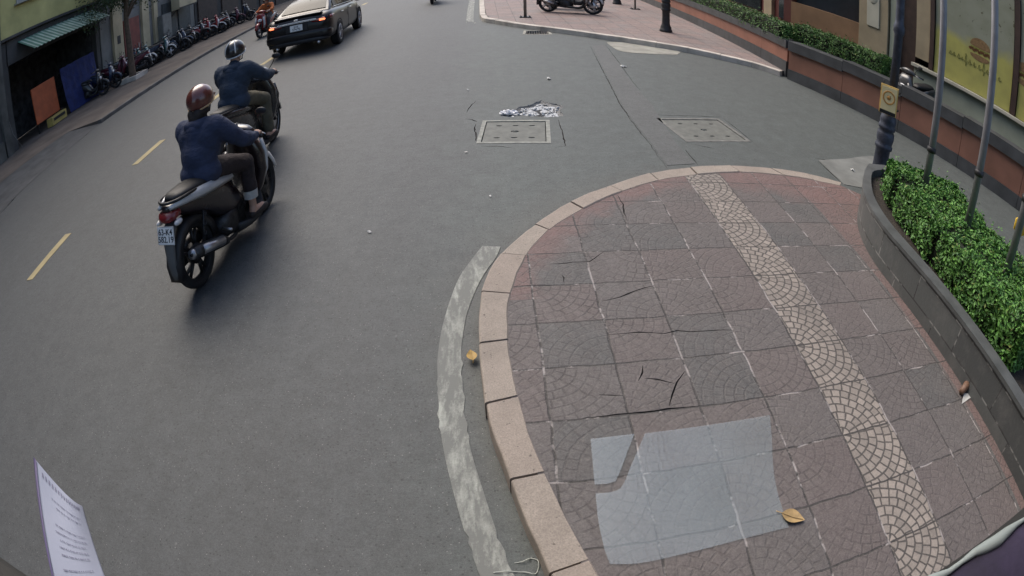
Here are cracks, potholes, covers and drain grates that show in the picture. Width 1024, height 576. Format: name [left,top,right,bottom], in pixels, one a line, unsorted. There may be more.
pothole [501,100,563,117]
crack [587,367,695,418]
crack [594,48,665,165]
manhole cover [476,120,551,144]
manhole cover [657,118,751,142]
